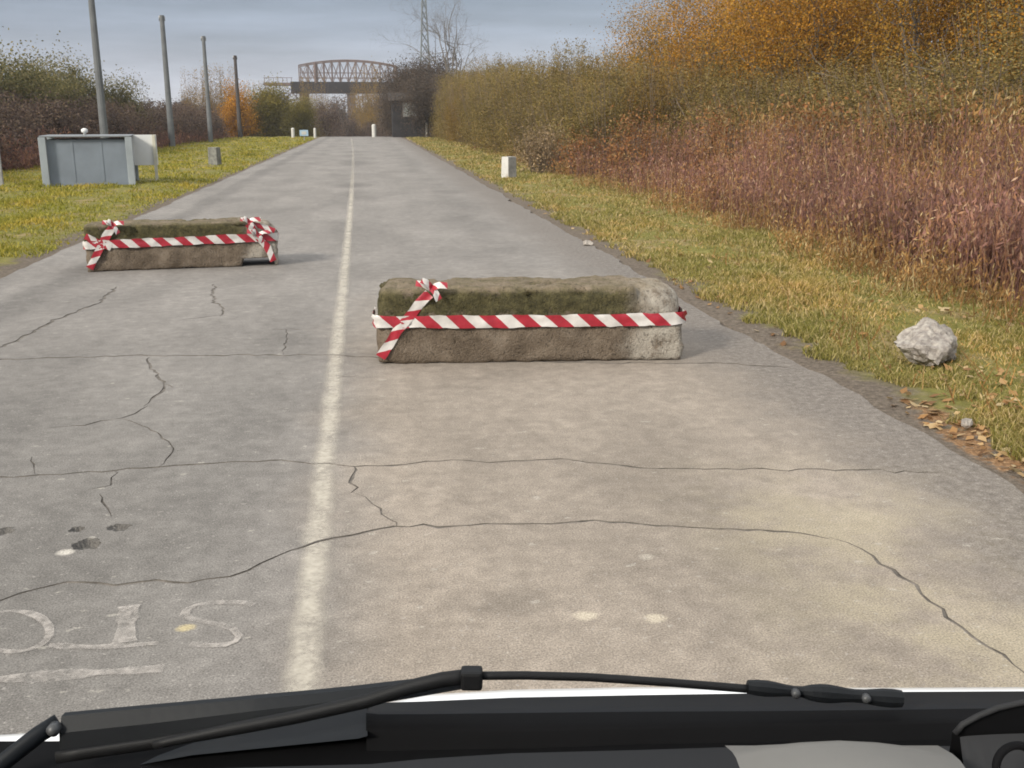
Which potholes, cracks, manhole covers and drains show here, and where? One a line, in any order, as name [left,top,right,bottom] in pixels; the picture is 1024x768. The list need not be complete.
crack [184,284,225,320]
pothole [106,524,133,532]
pothole [71,538,101,550]
crack [0,329,1024,673]
